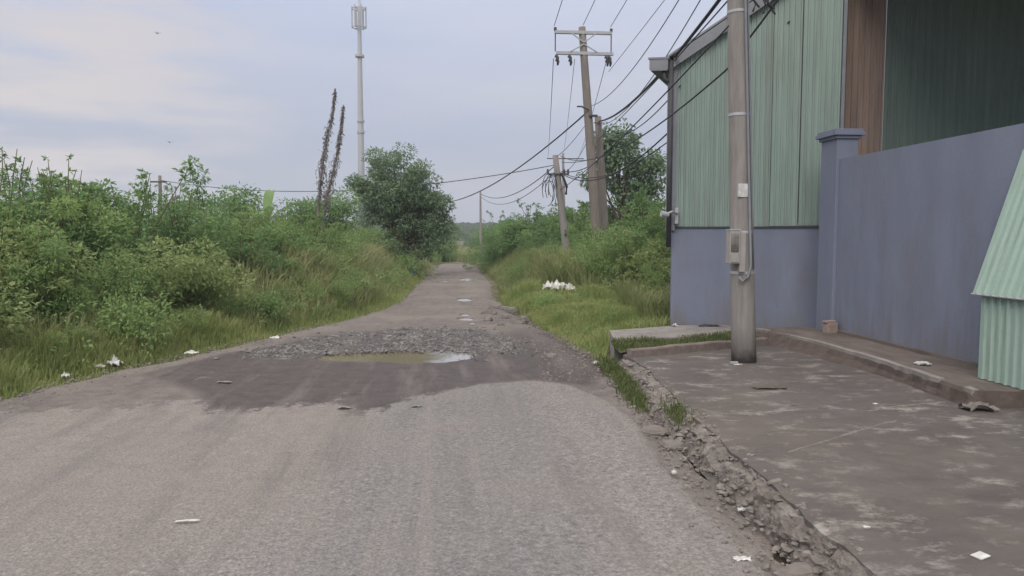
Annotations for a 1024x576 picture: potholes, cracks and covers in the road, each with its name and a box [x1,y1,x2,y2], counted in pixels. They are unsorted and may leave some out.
pothole [315,349,475,364]
